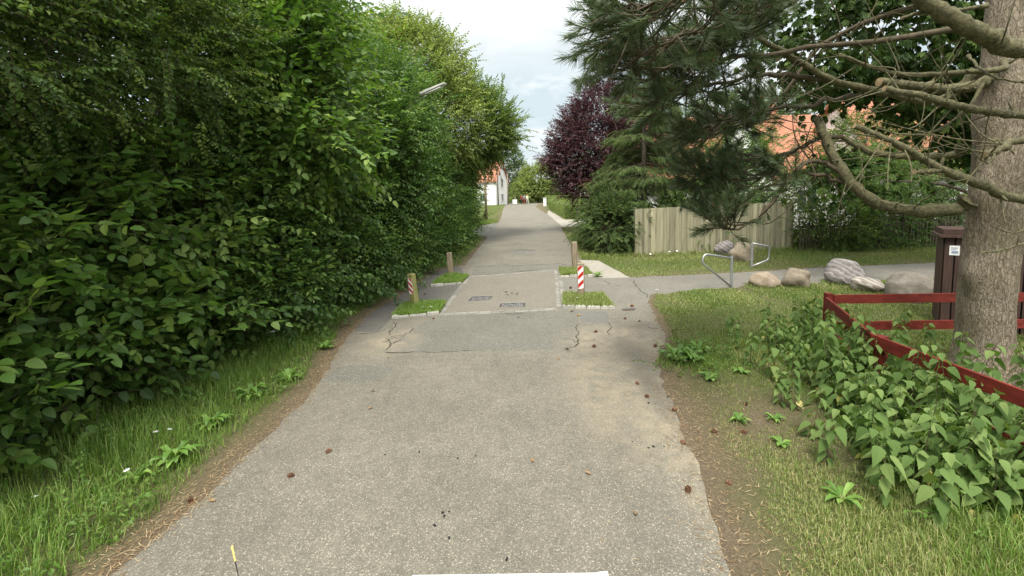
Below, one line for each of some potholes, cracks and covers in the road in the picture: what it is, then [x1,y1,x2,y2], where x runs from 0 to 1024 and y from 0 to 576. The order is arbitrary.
crack [385,322,473,353]
crack [565,323,612,350]
